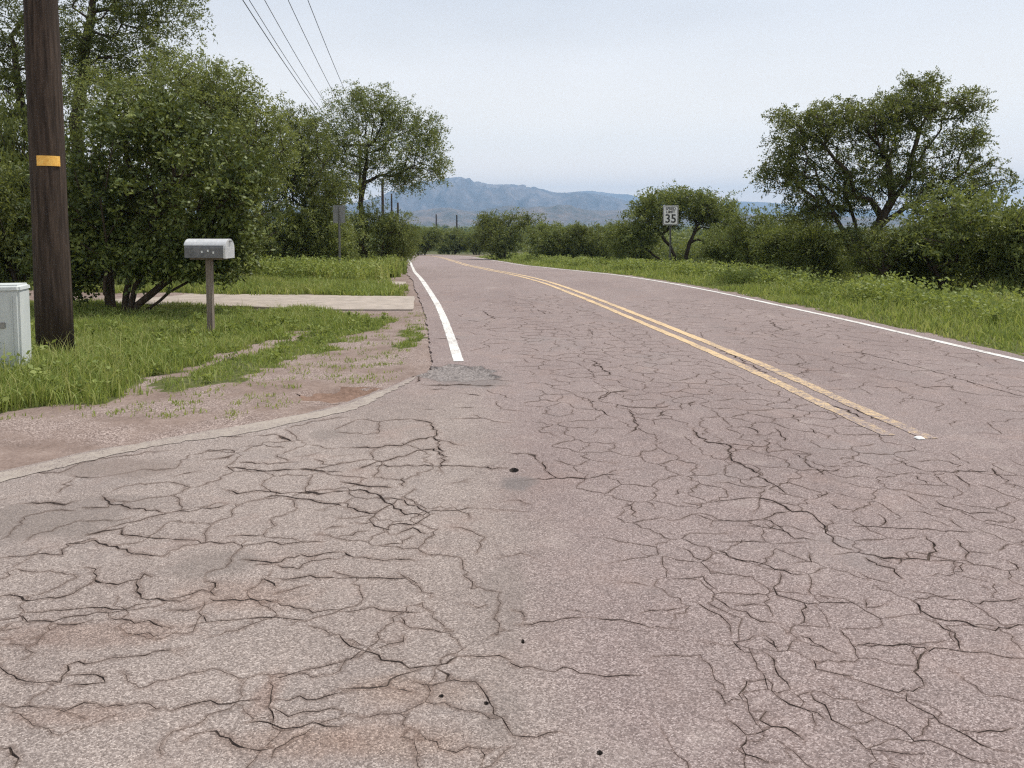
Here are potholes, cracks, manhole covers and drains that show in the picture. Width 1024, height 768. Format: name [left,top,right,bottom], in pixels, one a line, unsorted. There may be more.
crack [503,294,1024,768]
crack [412,300,546,423]
crack [0,409,639,768]
